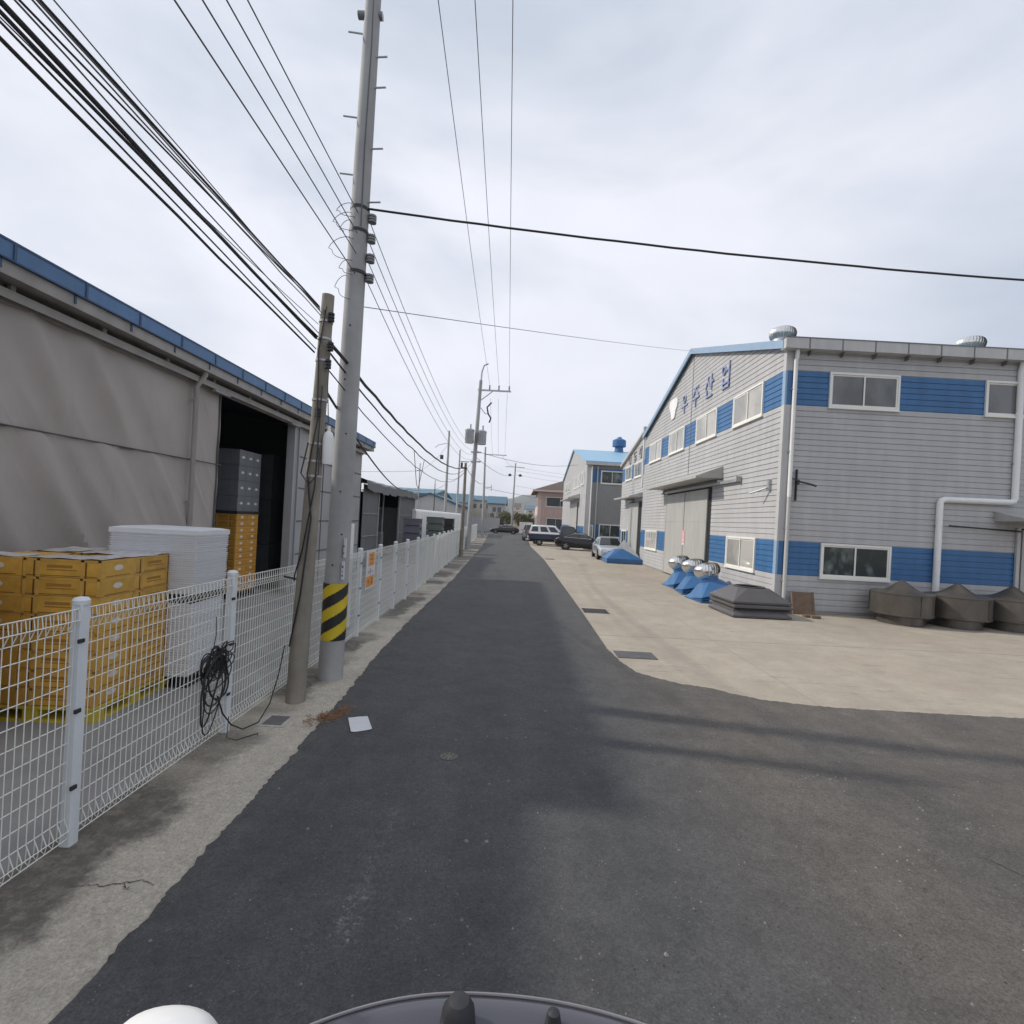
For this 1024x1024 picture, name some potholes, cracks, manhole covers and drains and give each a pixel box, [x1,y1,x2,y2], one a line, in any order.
crack [64,879,153,889]
manhole cover [439,751,458,761]
utility cover [255,714,296,728]
